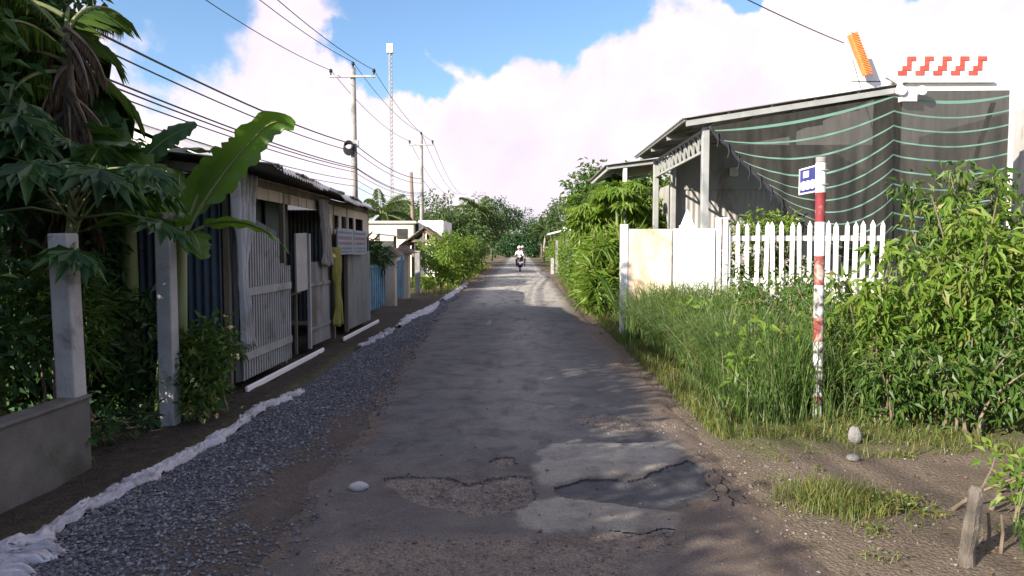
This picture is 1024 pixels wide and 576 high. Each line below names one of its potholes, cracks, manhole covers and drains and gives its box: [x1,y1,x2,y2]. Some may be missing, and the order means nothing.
pothole [487,456,518,469]
crack [707,469,746,507]
pothole [382,475,536,517]
